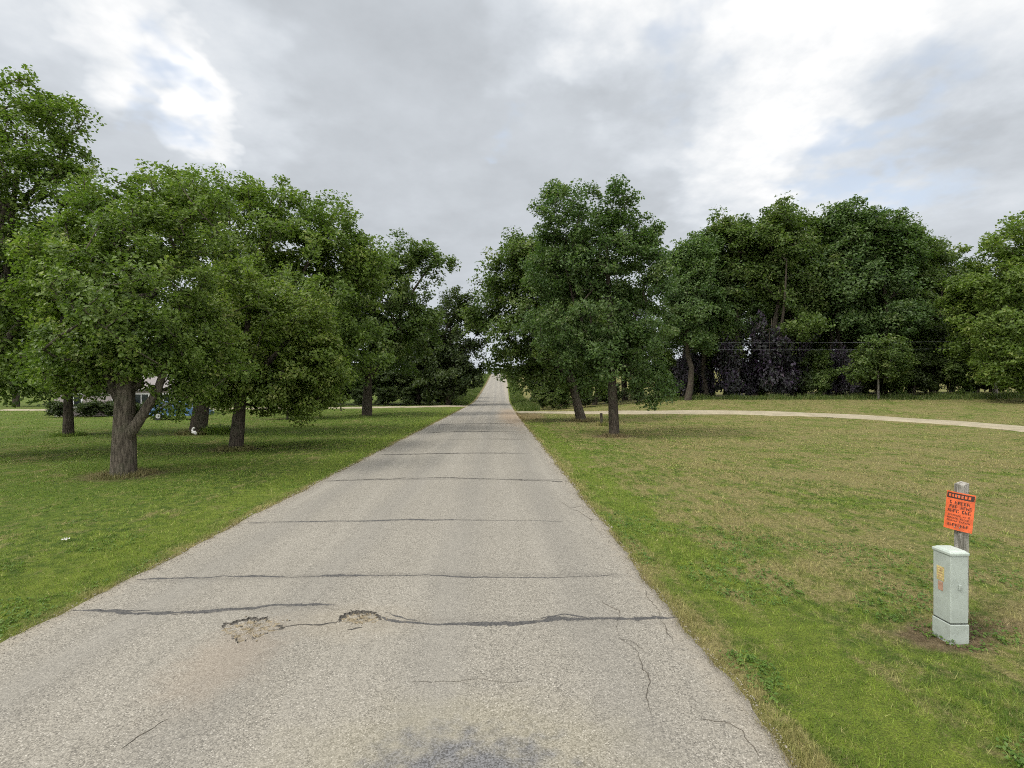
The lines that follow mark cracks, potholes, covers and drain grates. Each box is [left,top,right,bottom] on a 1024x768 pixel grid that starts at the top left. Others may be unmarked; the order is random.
pothole [335,609,387,626]
crack [381,593,676,713]
pothole [212,613,290,645]
